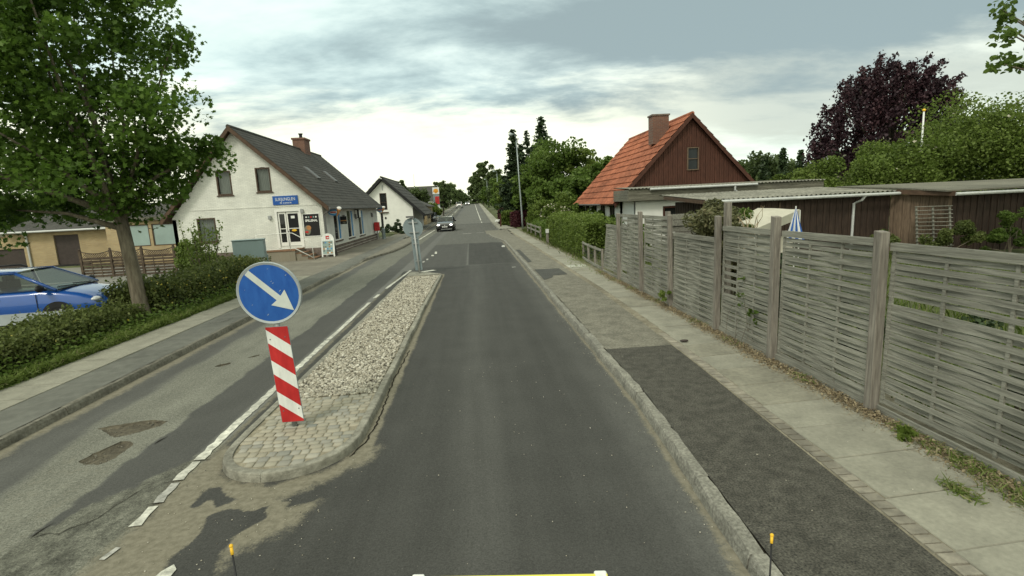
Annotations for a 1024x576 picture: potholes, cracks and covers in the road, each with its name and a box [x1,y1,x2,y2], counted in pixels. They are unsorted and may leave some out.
crack [32,479,183,537]
